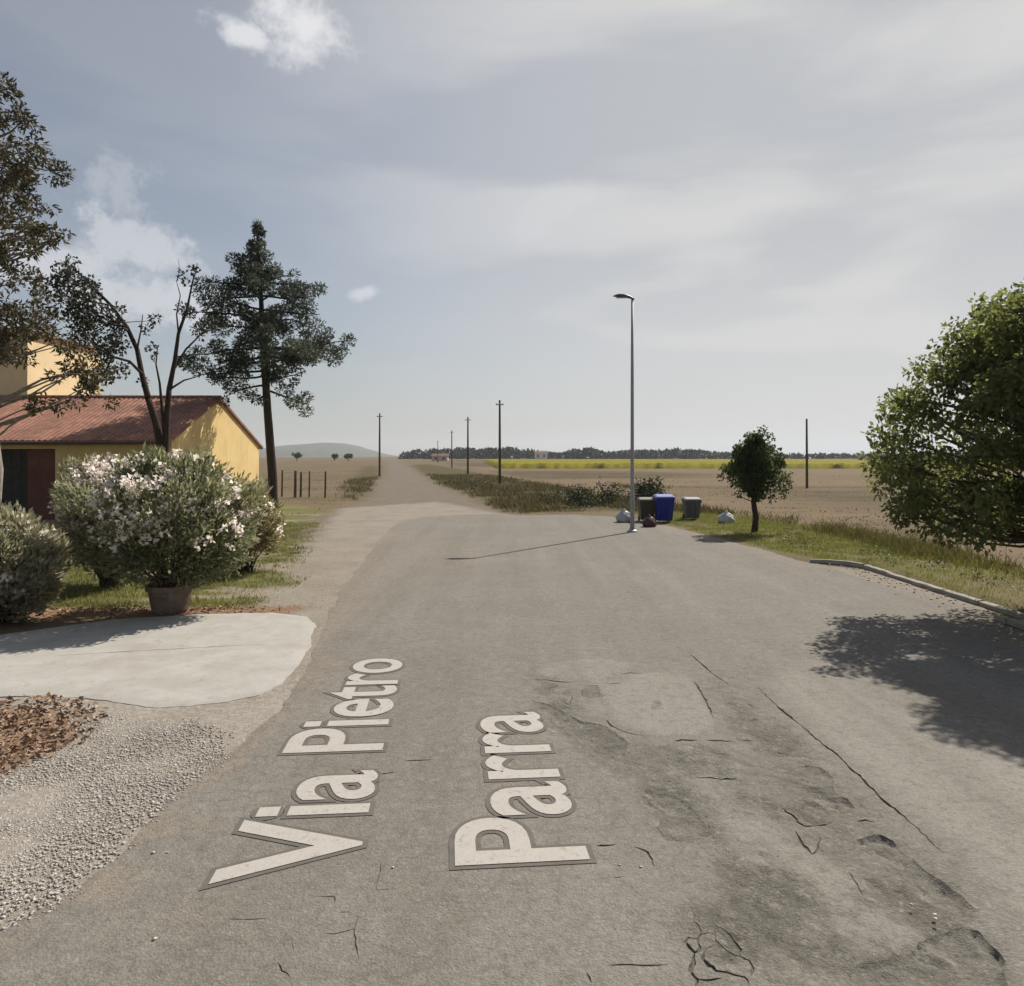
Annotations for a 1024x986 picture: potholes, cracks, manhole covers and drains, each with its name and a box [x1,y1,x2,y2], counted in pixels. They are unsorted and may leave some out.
pothole [845,927,1008,986]
crack [691,655,728,717]
crack [783,808,833,854]
pothole [853,834,976,916]
crack [684,912,755,986]
crack [313,896,359,960]
